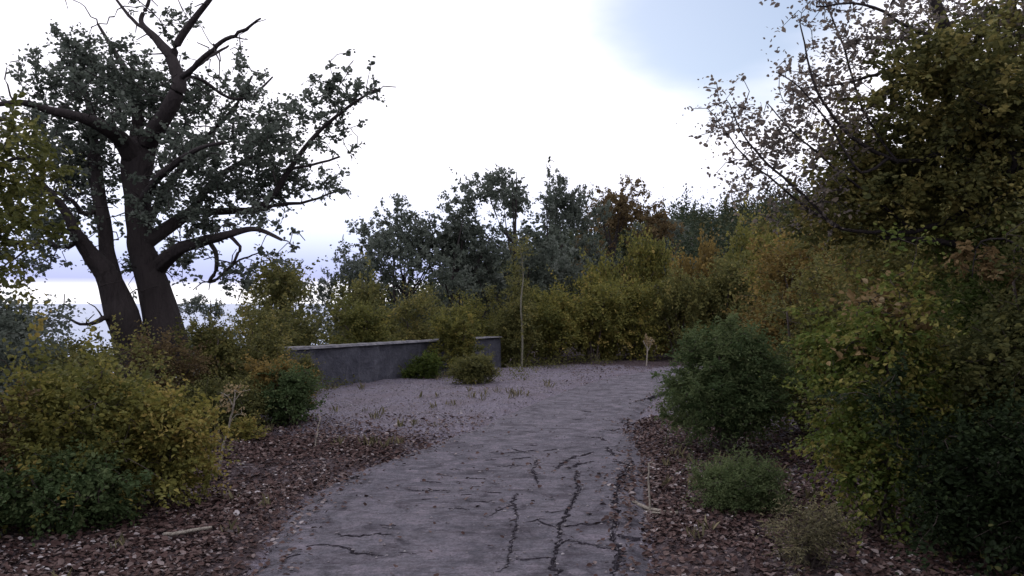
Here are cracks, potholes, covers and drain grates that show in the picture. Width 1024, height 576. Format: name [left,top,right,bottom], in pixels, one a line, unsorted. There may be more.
crack [284,525,416,560]
crack [412,420,640,576]
